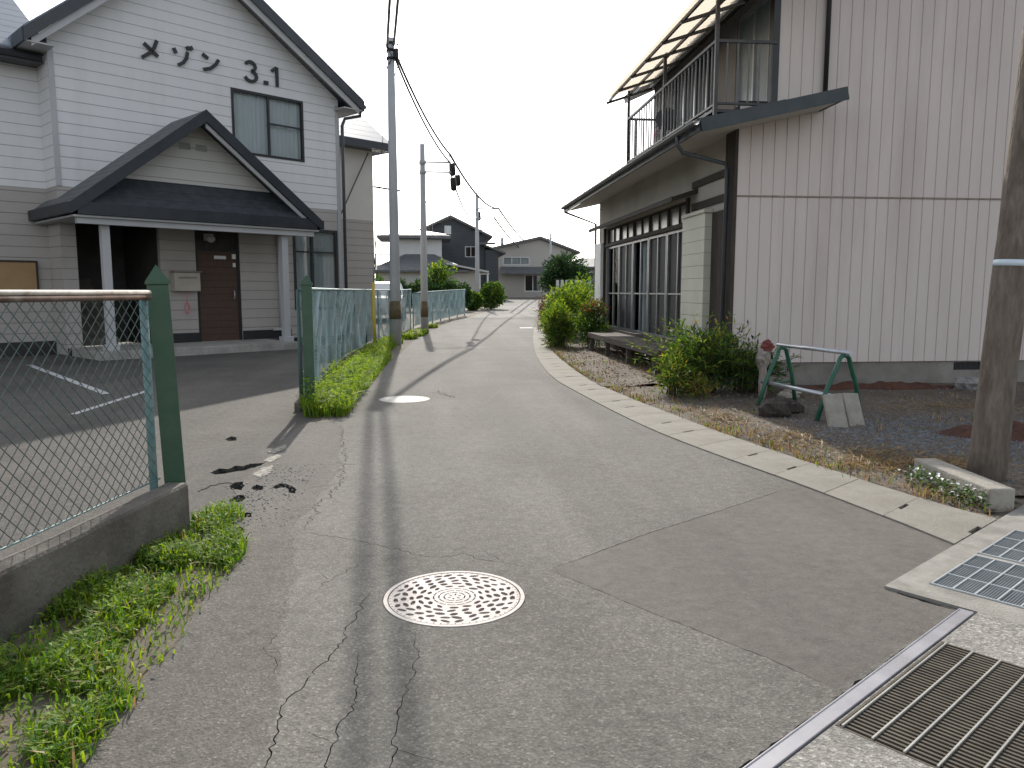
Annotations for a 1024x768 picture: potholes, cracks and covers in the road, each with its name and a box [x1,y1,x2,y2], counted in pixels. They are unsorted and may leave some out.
crack [389,629,449,768]
manhole cover [383,571,525,628]
drain grate [836,642,1024,768]
drain grate [929,555,1024,609]
crack [254,592,370,768]
drain grate [977,530,1024,564]
crack [284,432,518,609]
